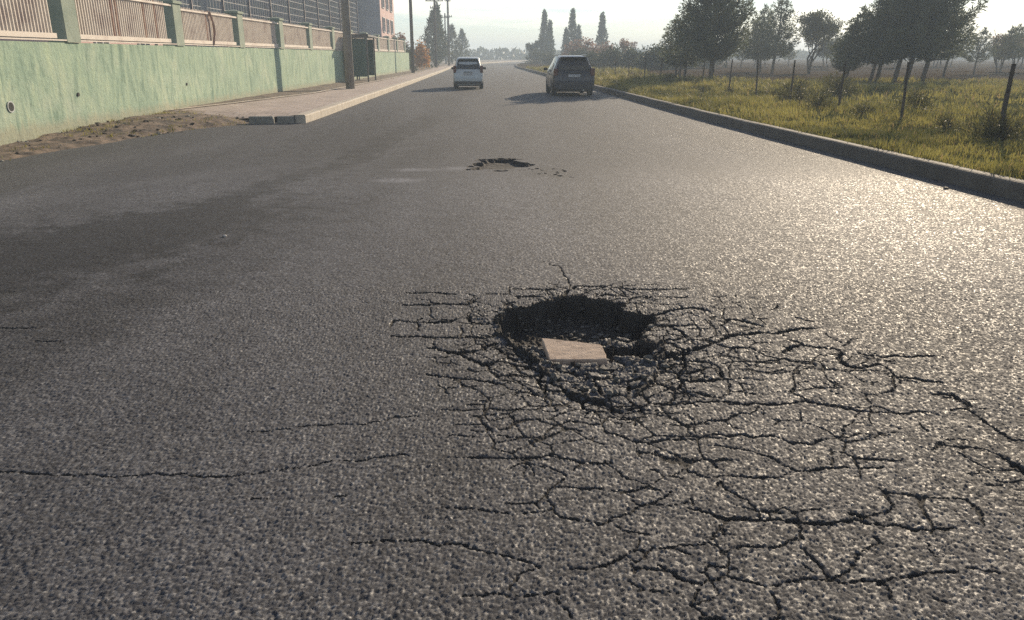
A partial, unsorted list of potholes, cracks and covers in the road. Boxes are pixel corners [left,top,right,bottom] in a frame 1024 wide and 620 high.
crack [0,453,408,479]
crack [0,327,60,342]
crack [350,264,1024,620]
pothole [491,294,670,405]
pothole [465,158,535,172]
